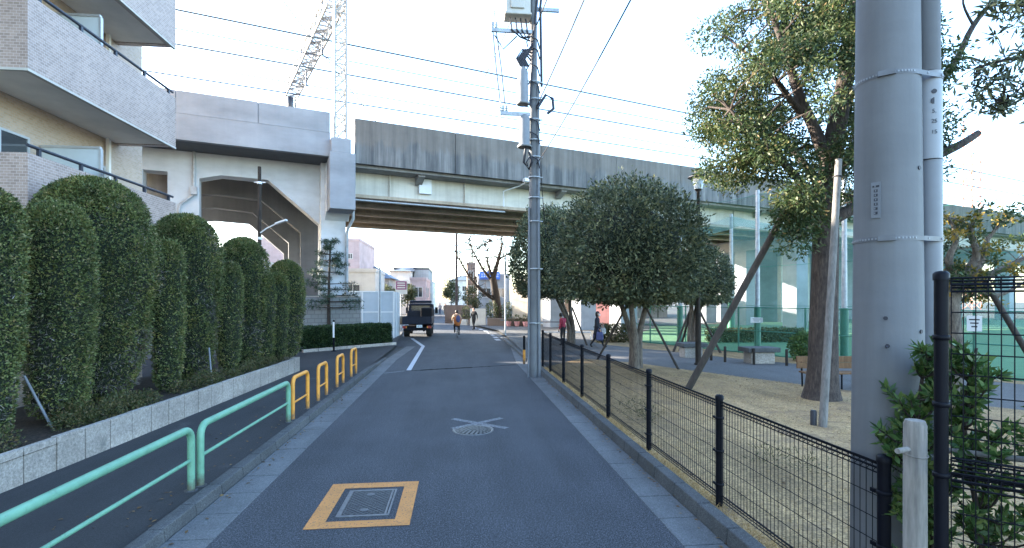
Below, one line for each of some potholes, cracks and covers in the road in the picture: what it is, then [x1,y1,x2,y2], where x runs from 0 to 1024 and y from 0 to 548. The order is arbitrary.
manhole cover [335,489,397,518]
manhole cover [452,425,494,436]
